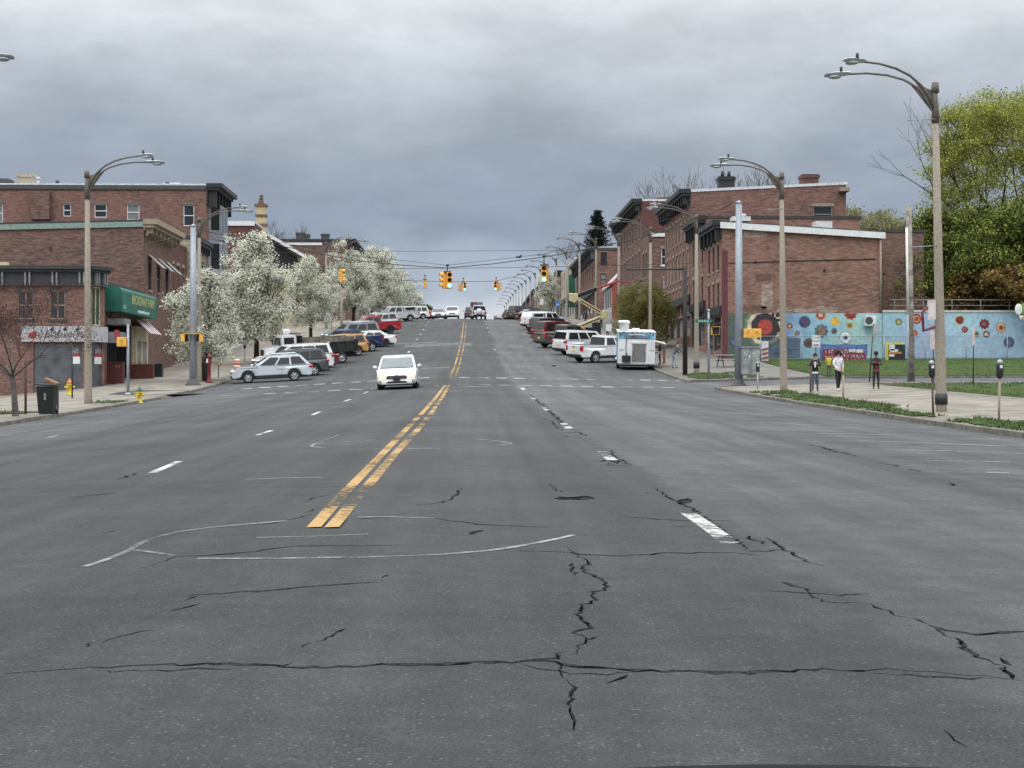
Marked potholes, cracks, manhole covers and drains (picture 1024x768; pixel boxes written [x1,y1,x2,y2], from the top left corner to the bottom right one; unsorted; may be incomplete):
crack [396,488,533,535]
crack [6,547,1024,731]
